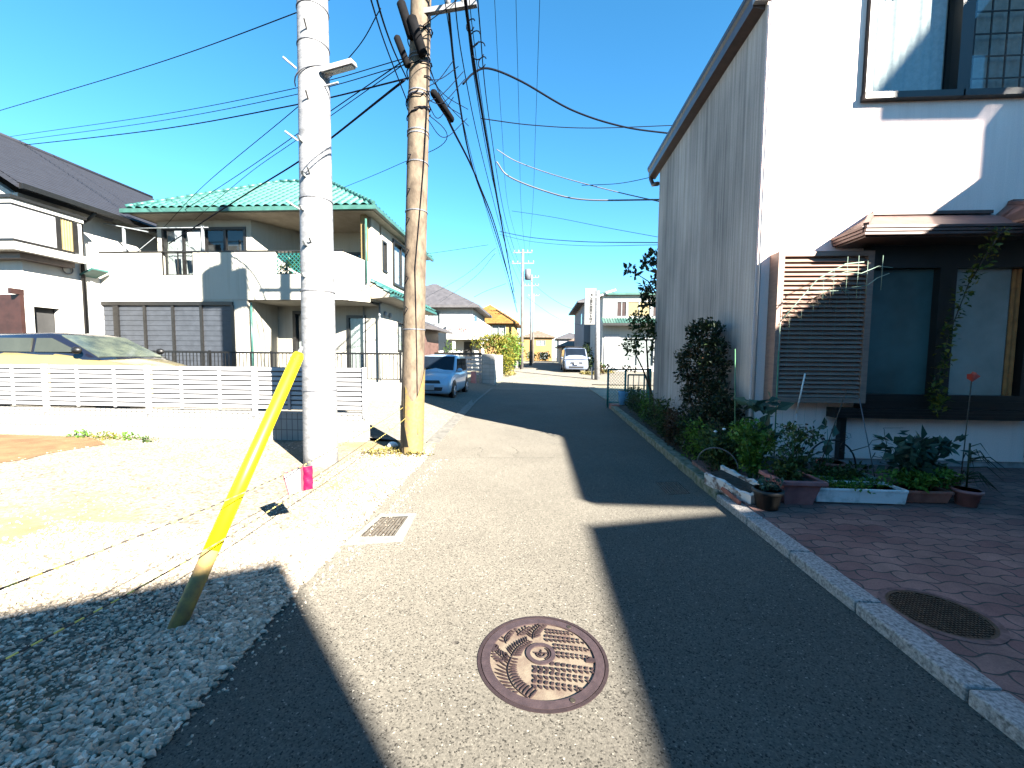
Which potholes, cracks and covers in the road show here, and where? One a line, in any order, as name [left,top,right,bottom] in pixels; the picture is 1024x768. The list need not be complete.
drain grate [656,482,690,495]
manhole cover [877,587,1011,645]
manhole cover [477,616,609,714]
drain grate [344,513,416,545]
